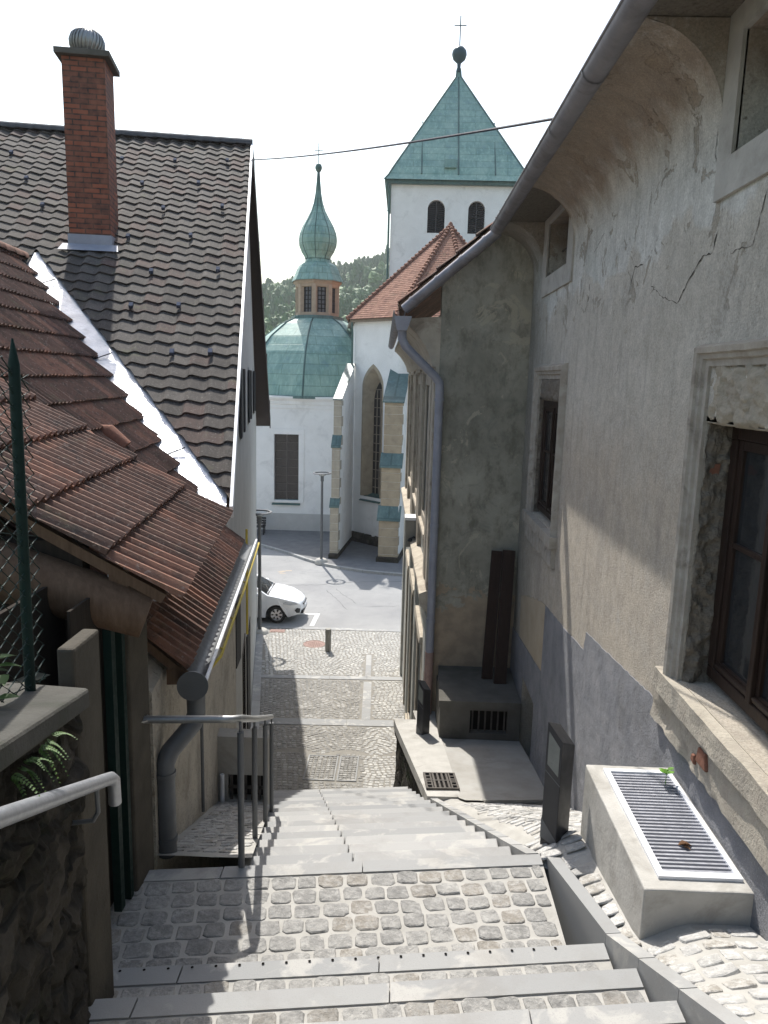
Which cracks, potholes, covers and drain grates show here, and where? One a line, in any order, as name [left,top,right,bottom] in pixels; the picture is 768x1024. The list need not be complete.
drain grate [423,772,460,791]
manhole cover [303,640,325,648]
